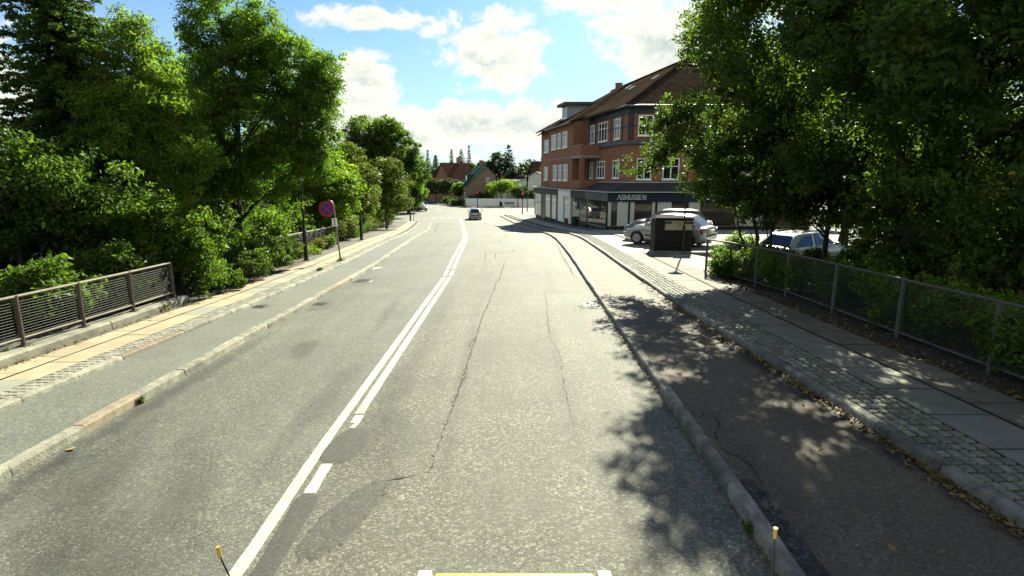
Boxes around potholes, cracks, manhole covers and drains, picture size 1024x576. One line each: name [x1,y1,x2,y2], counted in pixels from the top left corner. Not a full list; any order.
crack [383,237,513,481]
crack [700,413,831,576]
